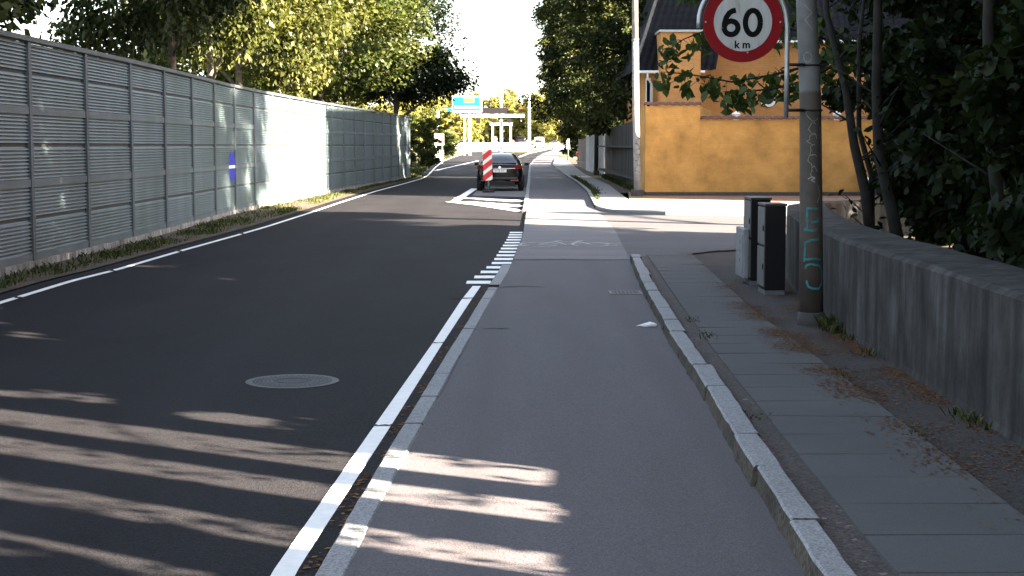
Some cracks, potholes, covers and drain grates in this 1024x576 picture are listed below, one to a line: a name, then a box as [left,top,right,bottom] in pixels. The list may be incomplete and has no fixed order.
manhole cover [245,374,339,389]
